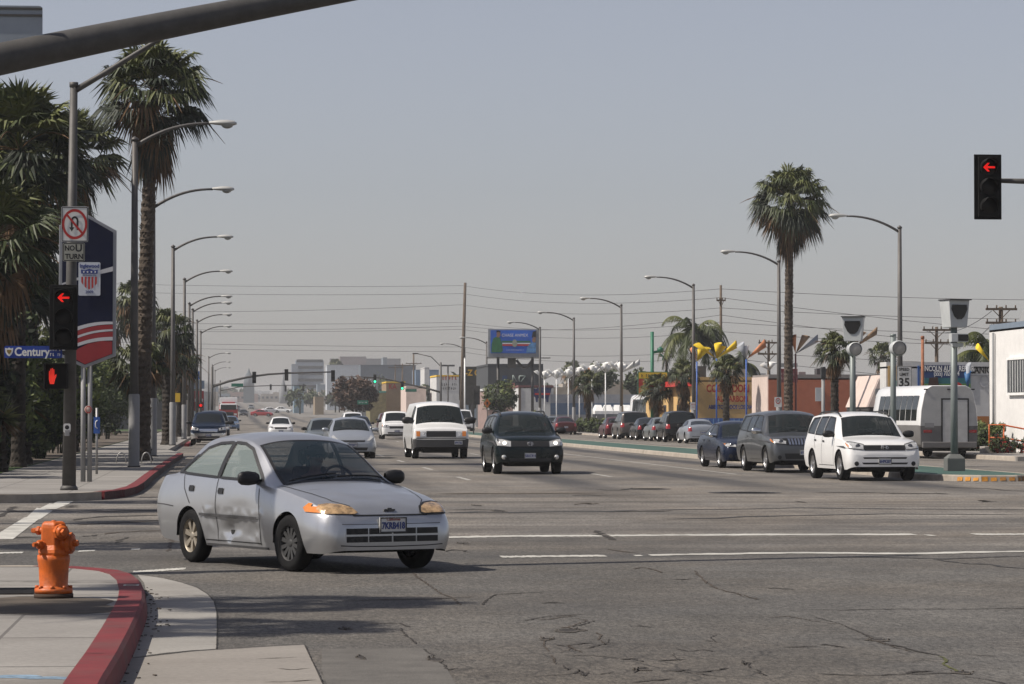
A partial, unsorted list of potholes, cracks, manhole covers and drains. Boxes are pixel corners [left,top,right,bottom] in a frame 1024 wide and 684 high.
crack [680,570,1003,683]
crack [516,602,768,682]
crack [343,572,528,605]
crack [591,530,662,573]
crack [368,623,455,670]
